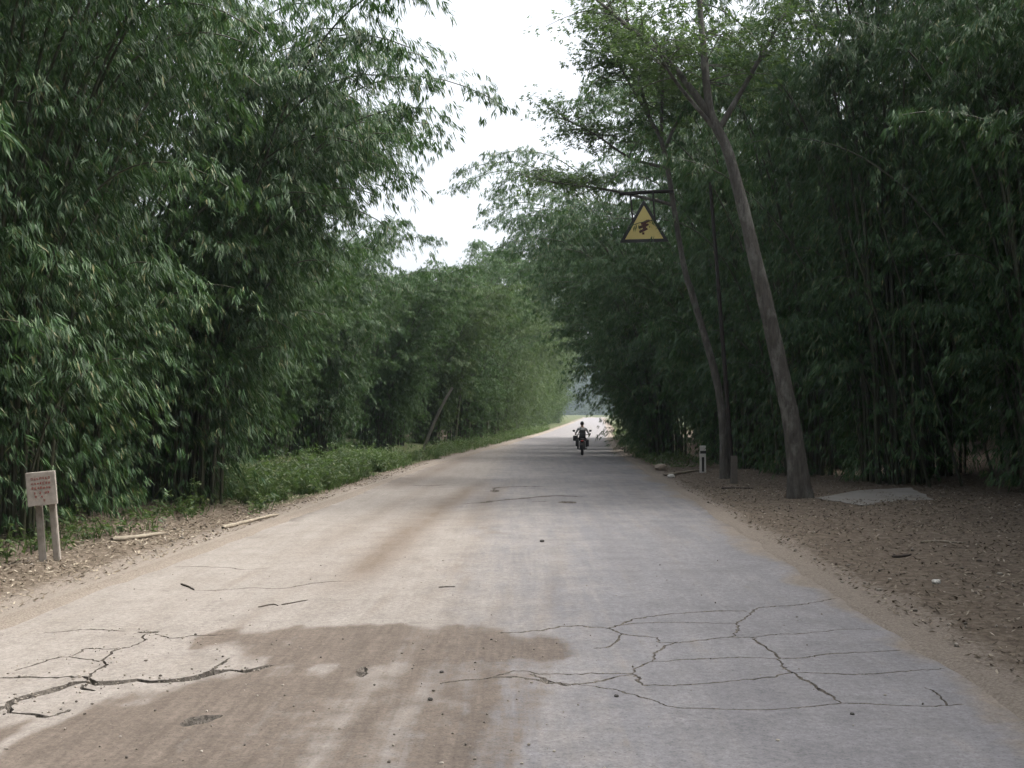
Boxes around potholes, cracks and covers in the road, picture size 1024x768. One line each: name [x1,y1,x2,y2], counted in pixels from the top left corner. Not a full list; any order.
crack [444,598,964,710]
crack [0,629,273,718]
crack [197,581,339,591]
pothole [180,715,223,727]
crack [466,486,578,504]
